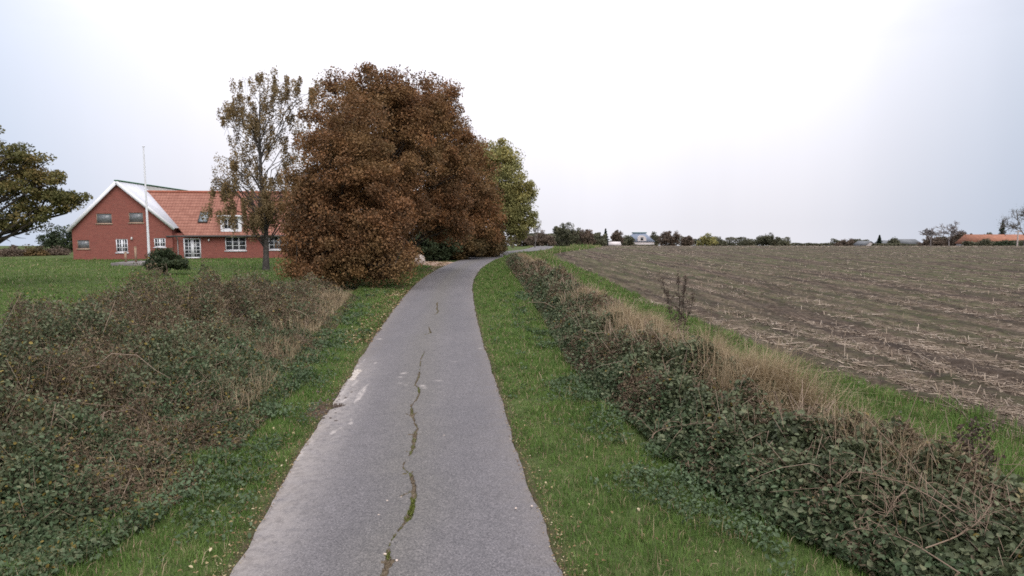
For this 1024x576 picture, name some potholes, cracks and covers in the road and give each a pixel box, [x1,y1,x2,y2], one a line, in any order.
crack [380,352,425,576]
